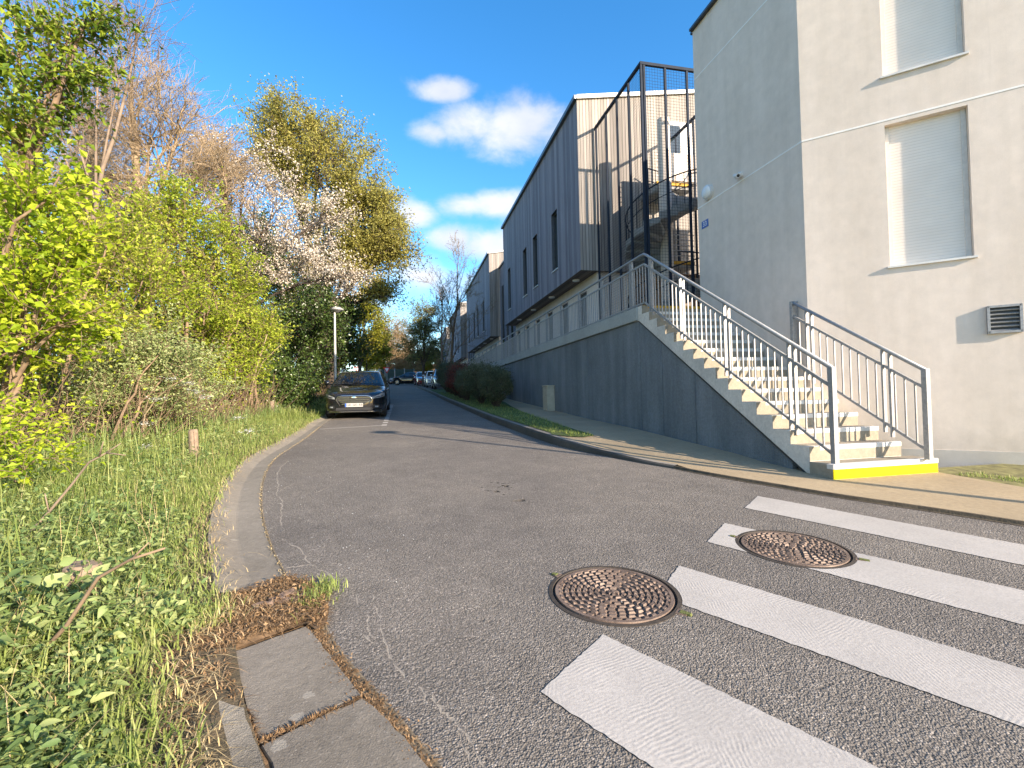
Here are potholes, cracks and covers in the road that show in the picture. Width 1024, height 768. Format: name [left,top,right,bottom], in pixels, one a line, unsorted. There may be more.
manhole cover [730,530,870,569]
crack [356,594,486,768]
manhole cover [549,566,692,627]
crack [276,461,333,577]
